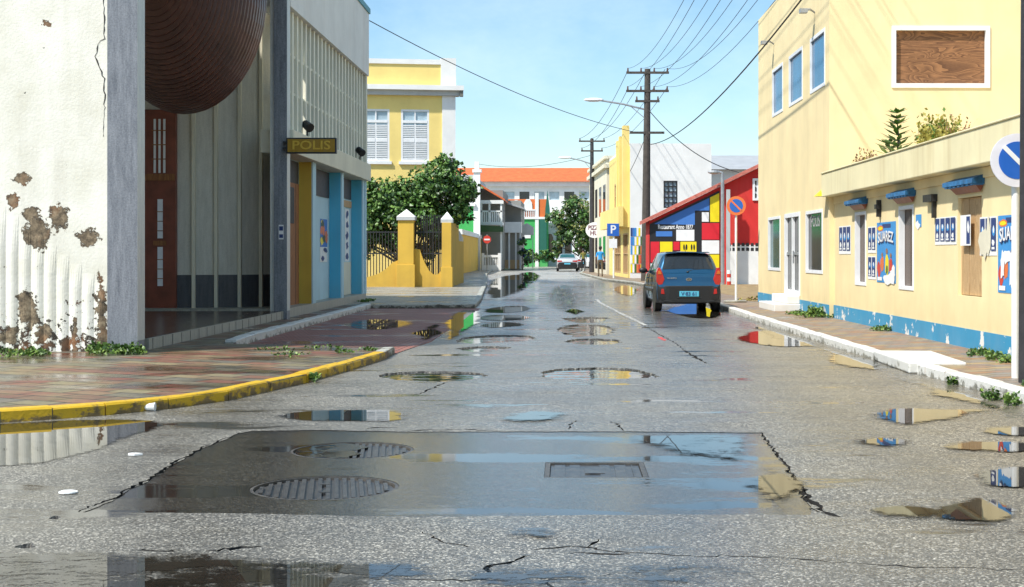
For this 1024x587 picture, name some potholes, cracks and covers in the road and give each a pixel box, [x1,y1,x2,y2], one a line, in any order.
pothole [541,367,660,380]
pothole [379,371,488,384]
crack [761,433,841,517]
crack [78,433,239,512]
crack [358,532,1013,587]
pothole [557,324,618,337]
pothole [456,335,535,343]
